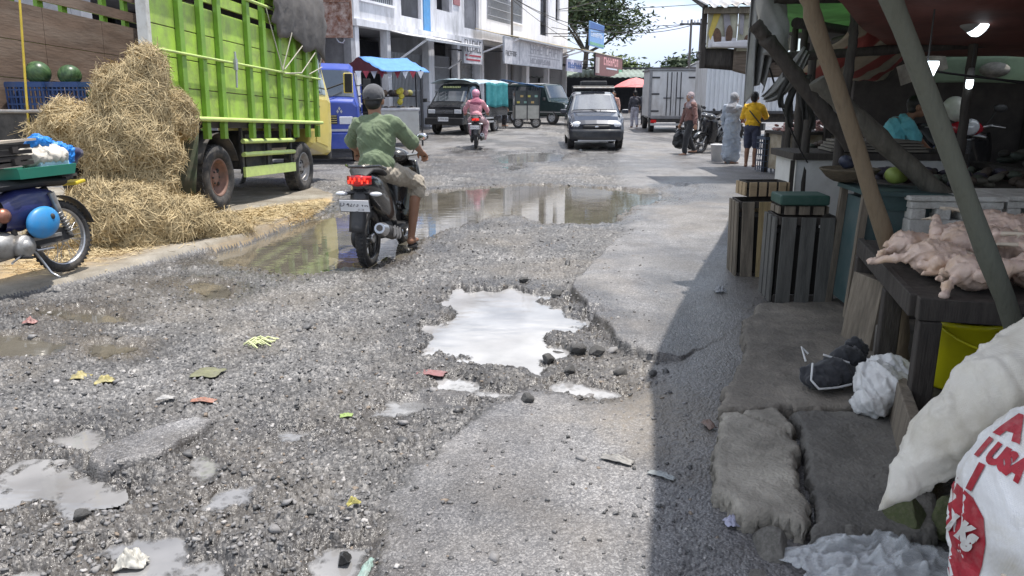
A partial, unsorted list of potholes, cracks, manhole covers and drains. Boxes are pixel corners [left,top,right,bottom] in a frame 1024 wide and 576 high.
pothole [536,371,627,399]
pothole [200,480,265,514]
pothole [408,281,603,376]
pothole [207,182,662,279]
pothole [181,450,237,484]
pothole [283,527,387,576]
pothole [79,336,146,359]
pothole [53,423,122,456]
pothole [0,453,128,525]
pothole [0,517,226,576]
